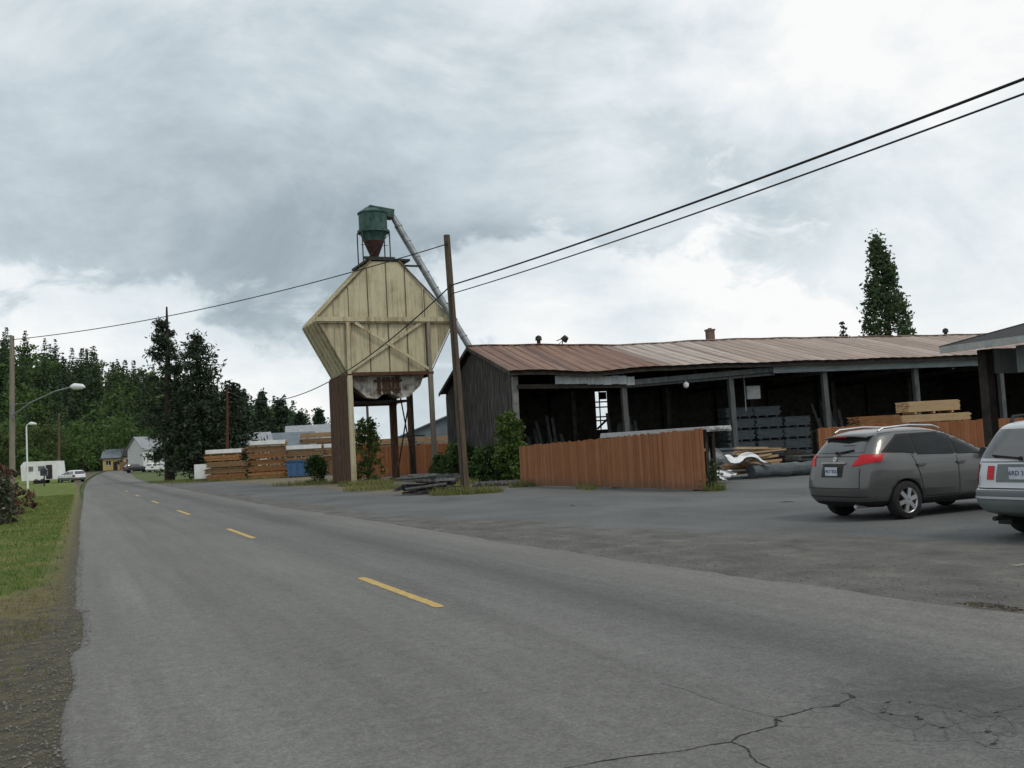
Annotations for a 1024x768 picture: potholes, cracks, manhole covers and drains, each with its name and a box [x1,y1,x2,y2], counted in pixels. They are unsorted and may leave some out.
crack [795,692,1023,755]
crack [565,682,856,768]
